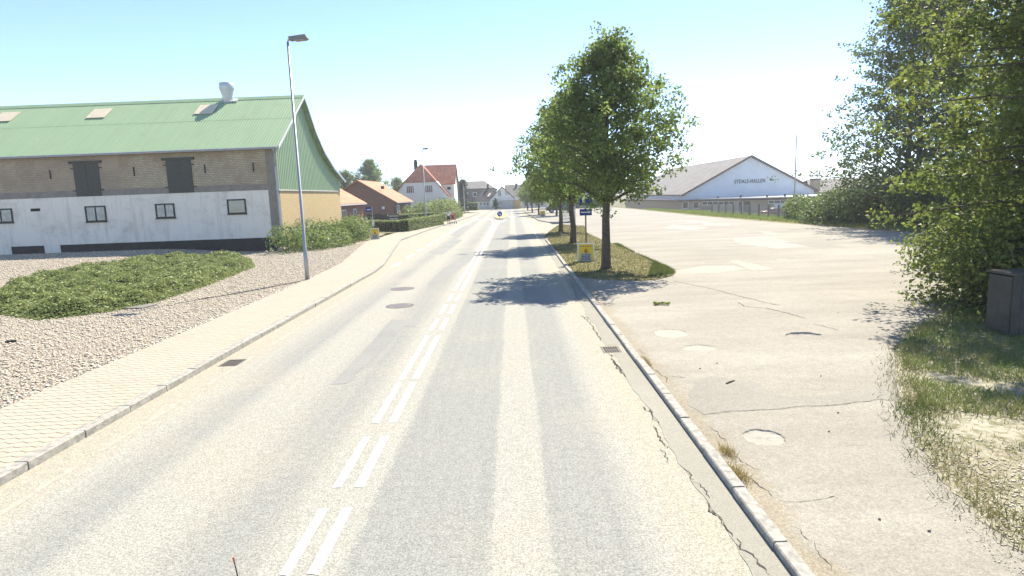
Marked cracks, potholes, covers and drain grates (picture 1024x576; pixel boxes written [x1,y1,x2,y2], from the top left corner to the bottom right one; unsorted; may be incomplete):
crack [644,407,767,572]
